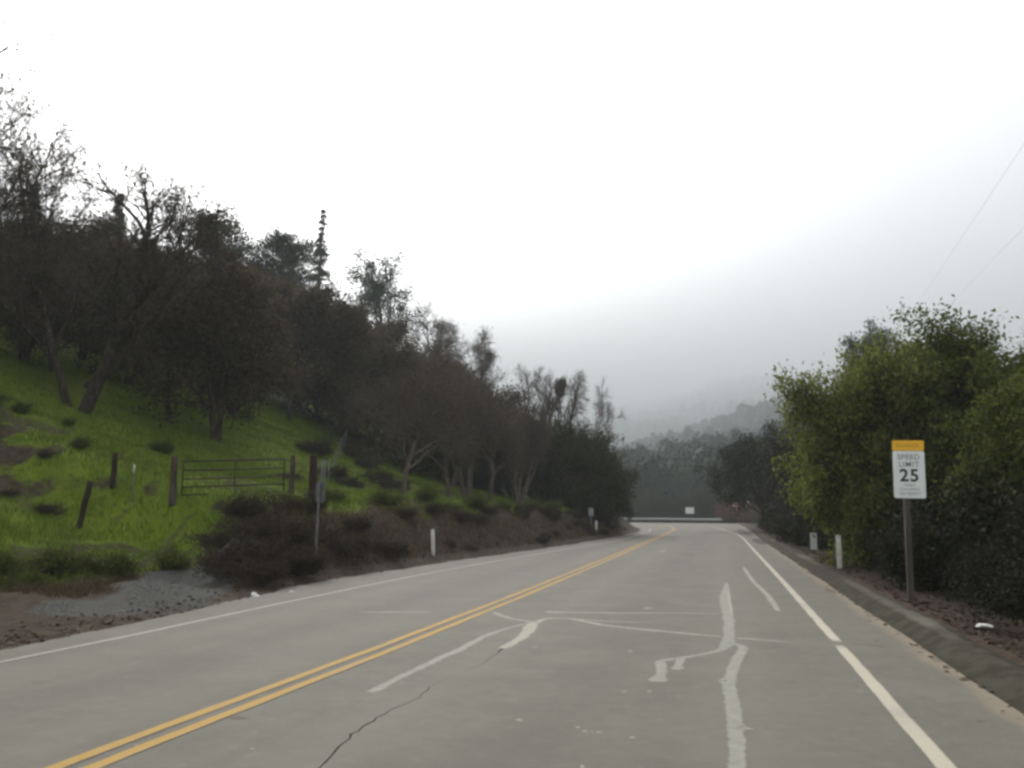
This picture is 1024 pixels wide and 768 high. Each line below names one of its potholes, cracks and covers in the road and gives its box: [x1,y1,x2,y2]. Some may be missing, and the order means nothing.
crack [319,649,502,768]
